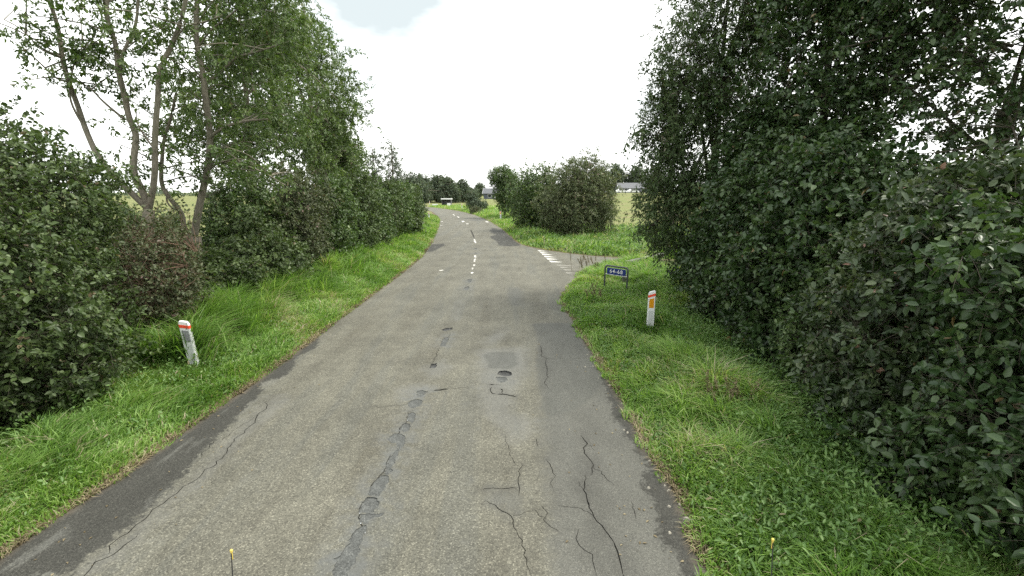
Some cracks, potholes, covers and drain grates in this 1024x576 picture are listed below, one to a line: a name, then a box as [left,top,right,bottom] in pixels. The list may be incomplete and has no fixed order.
crack [481,435,533,574]
crack [84,399,270,576]
crack [534,436,624,576]
